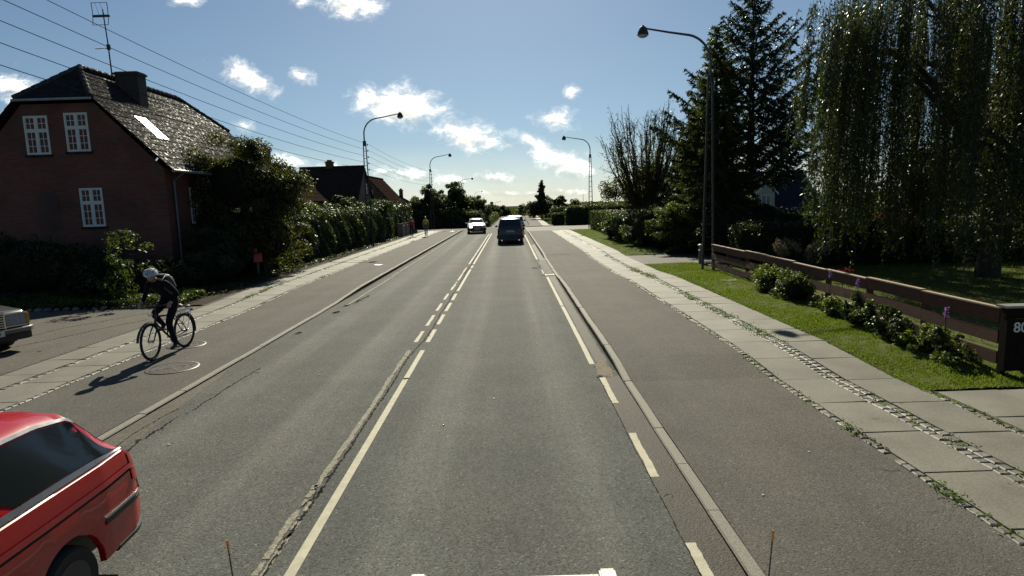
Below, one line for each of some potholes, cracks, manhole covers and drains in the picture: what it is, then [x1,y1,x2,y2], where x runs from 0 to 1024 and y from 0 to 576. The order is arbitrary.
crack [115,408,181,451]
manhole cover [144,361,200,375]
manhole cover [166,341,207,350]
